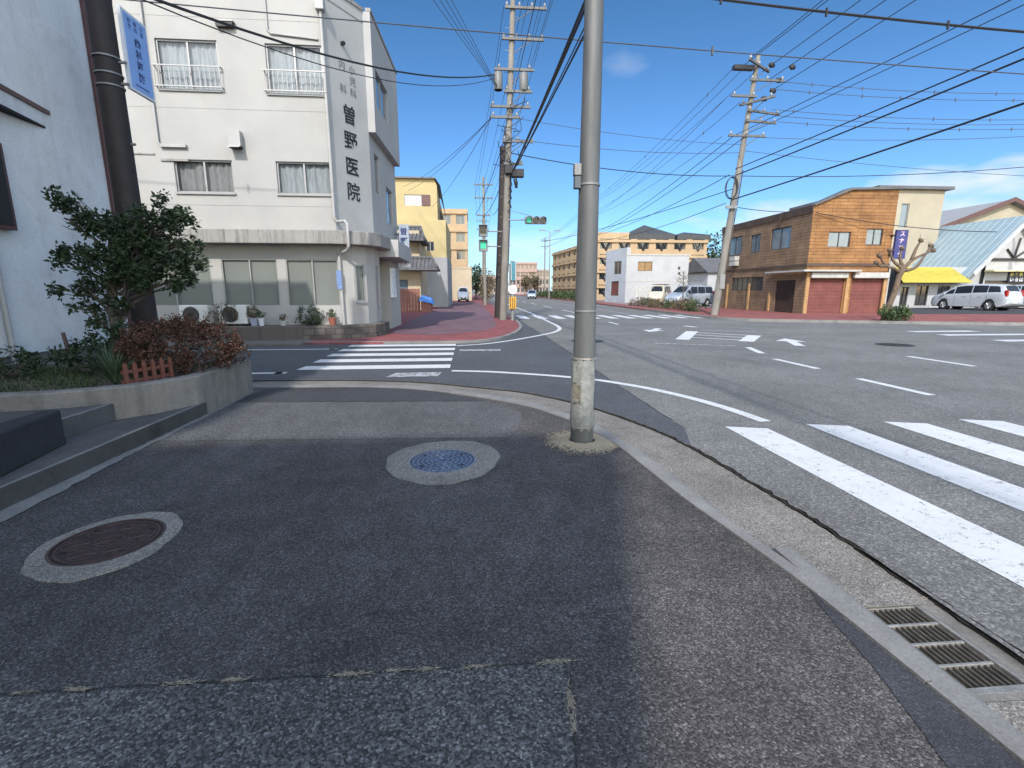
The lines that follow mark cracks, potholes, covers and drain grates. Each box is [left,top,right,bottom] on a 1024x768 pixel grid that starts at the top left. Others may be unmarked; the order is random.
manhole cover [386,441,500,485]
manhole cover [21,512,183,583]
